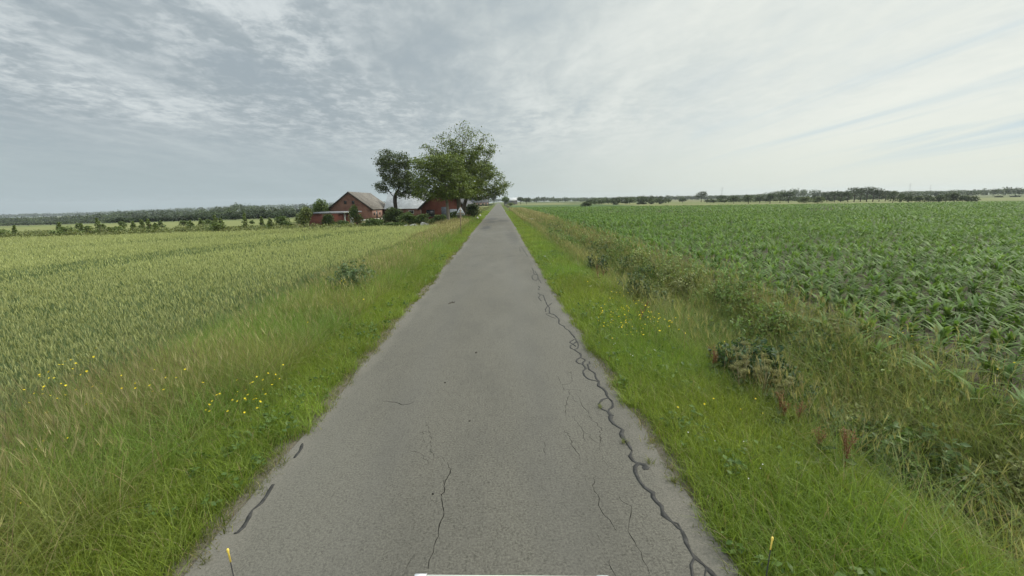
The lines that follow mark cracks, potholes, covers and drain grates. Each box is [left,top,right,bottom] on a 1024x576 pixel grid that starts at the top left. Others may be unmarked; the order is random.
crack [404,432,451,574]
crack [592,481,650,575]
crack [563,372,602,451]
